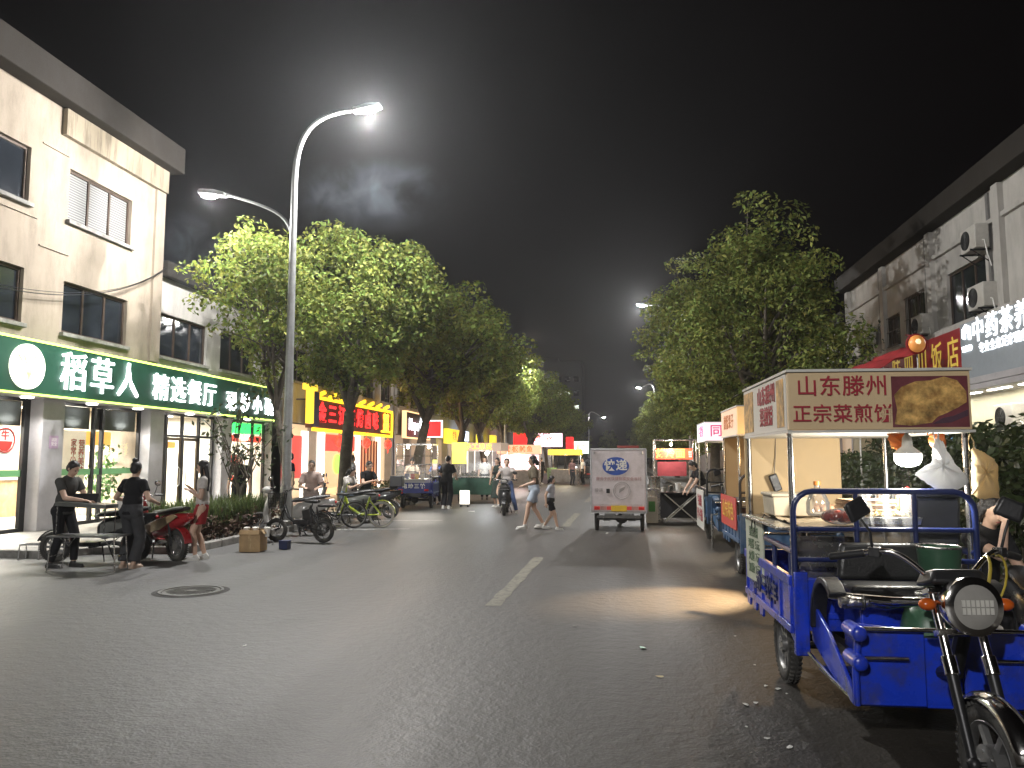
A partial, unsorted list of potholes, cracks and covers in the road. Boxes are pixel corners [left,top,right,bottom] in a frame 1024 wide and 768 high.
manhole cover [151,585,230,598]
